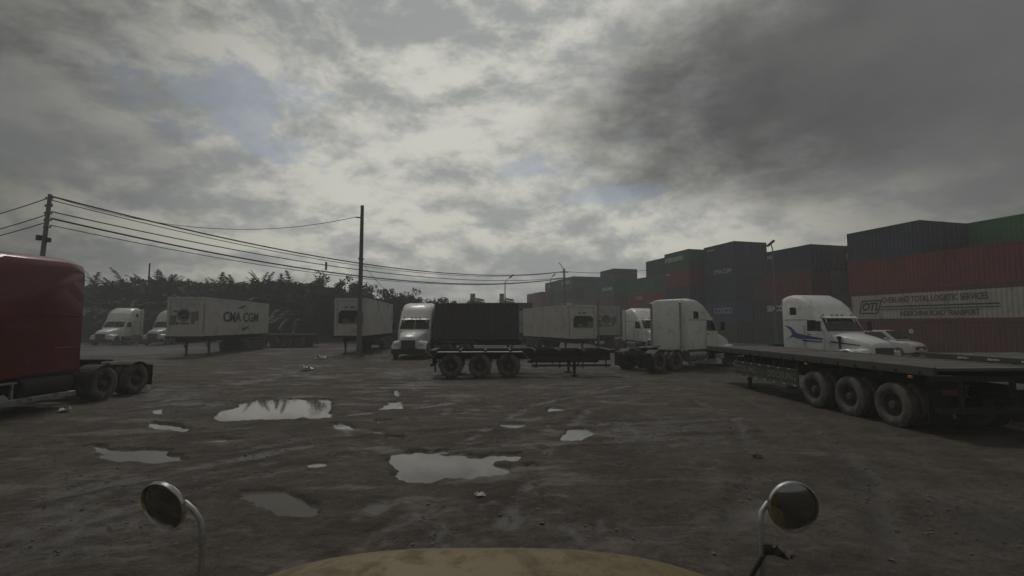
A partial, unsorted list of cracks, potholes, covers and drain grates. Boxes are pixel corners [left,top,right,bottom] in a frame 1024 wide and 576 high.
pothole [67,441,206,469]
pothole [368,398,416,412]
pothole [545,425,611,445]
pothole [197,395,346,424]
pothole [489,420,541,430]
pothole [134,418,213,434]
pothole [316,418,373,433]
pothole [215,481,349,525]
pothole [366,443,540,490]
